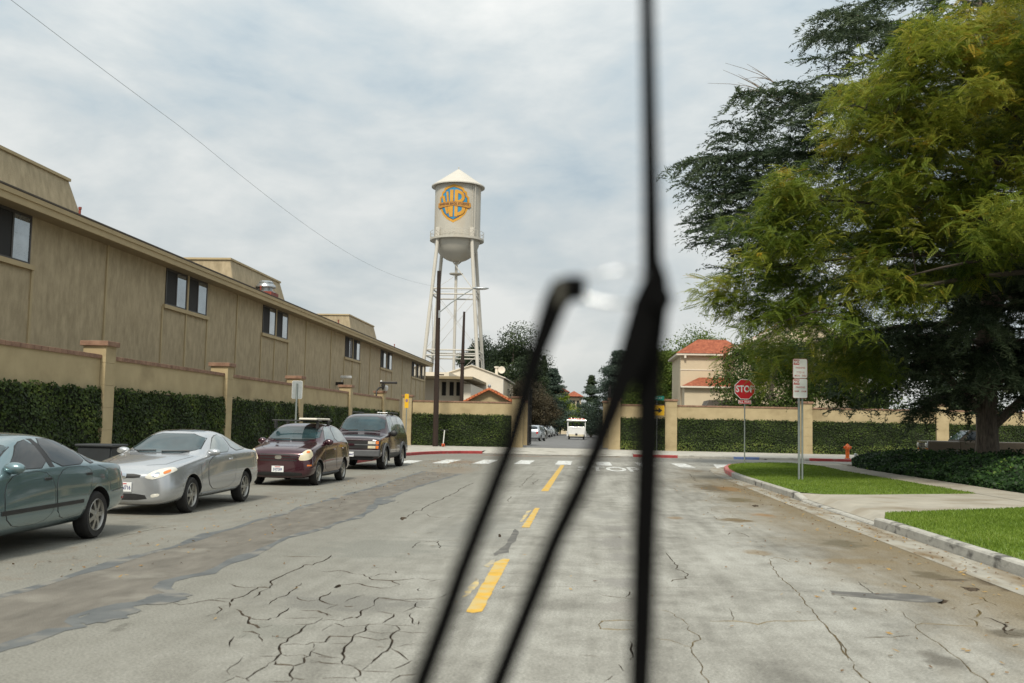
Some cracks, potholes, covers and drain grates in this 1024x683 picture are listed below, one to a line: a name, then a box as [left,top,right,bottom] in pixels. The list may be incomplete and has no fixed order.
crack [662,610,709,683]
crack [730,557,1024,683]
crack [598,620,630,630]
crack [175,541,442,683]
